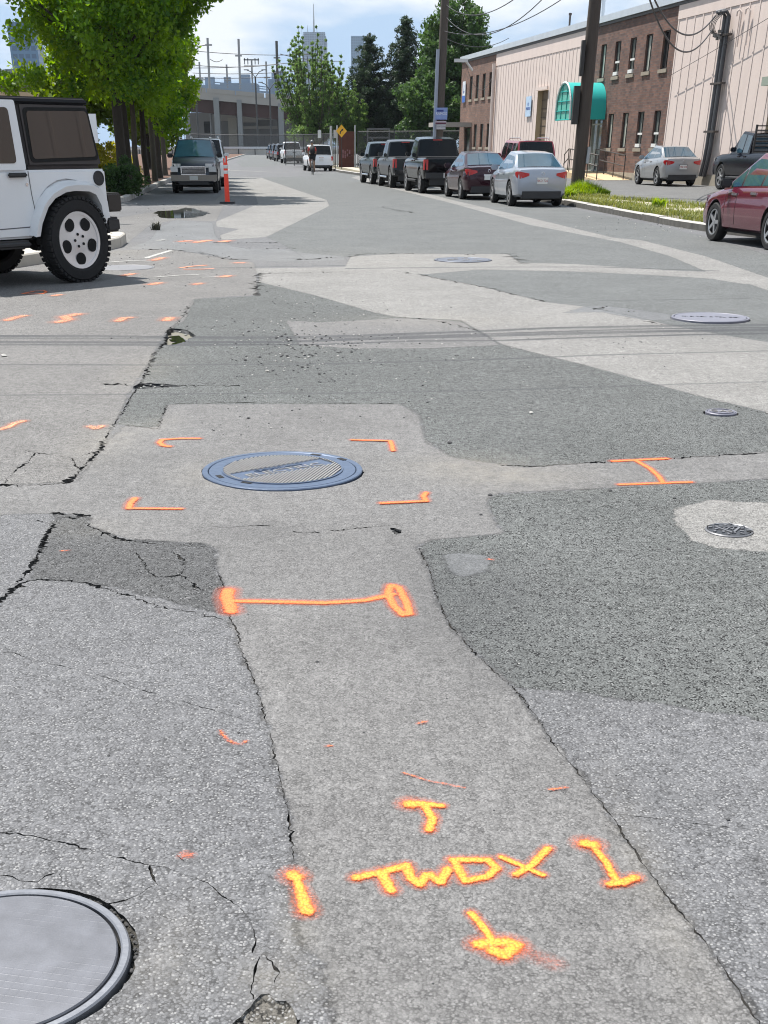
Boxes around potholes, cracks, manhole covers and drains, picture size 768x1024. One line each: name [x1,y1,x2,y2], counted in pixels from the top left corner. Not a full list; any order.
manhole cover [201,451,364,491]
pothole [233,994,301,1024]
crack [2,832,280,999]
crack [419,548,760,1024]
manhole cover [0,888,139,1024]
manhole cover [671,312,751,324]
crack [4,451,99,486]
manhole cover [703,408,738,417]
pothole [161,328,196,346]
crack [0,512,295,859]
manhole cover [705,523,754,538]
